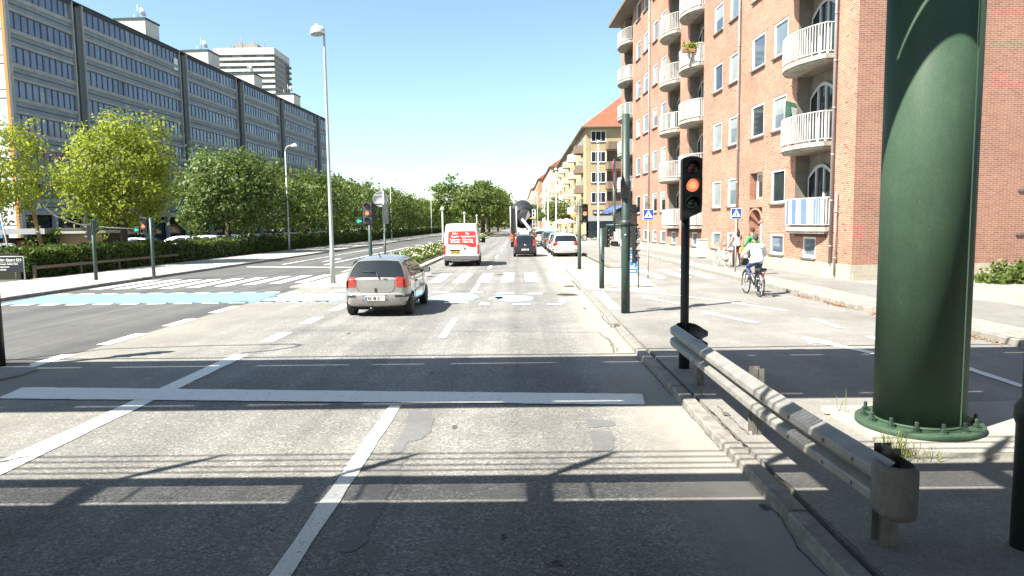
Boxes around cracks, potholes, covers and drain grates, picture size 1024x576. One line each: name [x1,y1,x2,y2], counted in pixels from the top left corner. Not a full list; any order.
crack [695,387,748,434]
